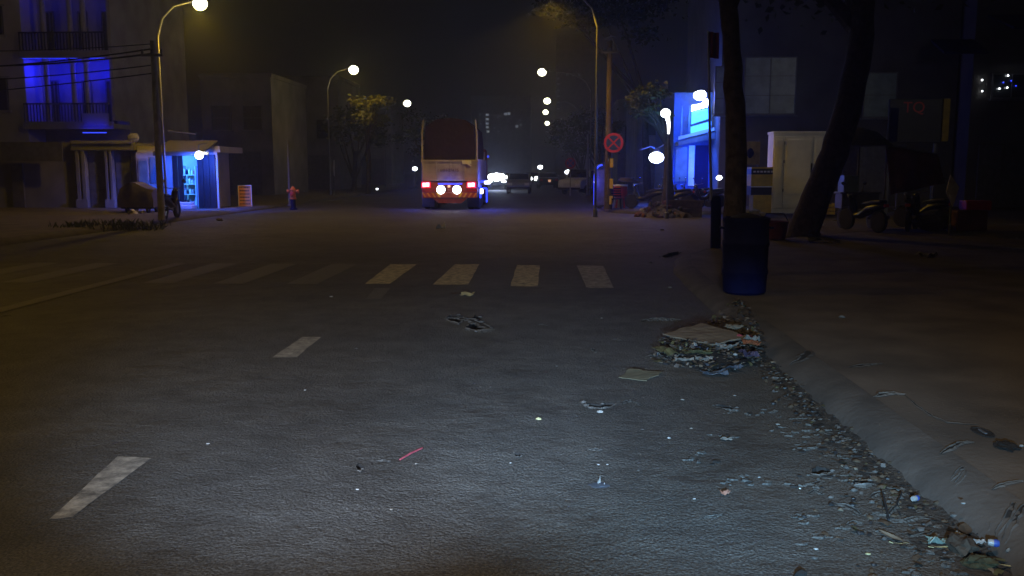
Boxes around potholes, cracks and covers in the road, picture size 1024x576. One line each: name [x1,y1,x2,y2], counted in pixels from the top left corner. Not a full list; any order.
pothole [443,314,467,325]
pothole [463,313,497,333]
pothole [577,400,621,410]
